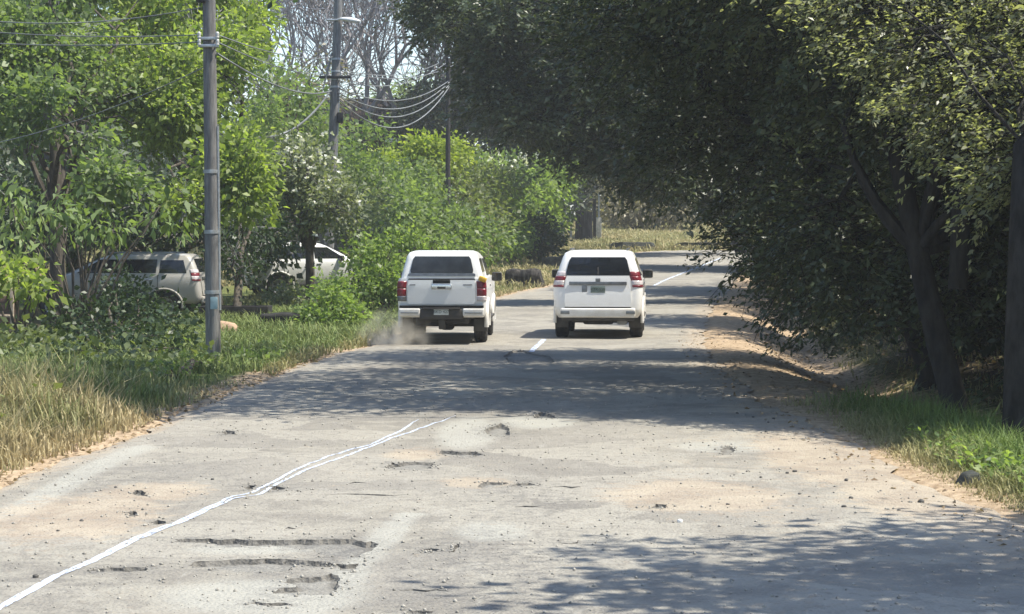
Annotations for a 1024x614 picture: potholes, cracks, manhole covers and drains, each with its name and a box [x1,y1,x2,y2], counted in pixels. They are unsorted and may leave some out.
pothole [387,462,434,470]
pothole [504,350,555,364]
pothole [189,558,333,572]
pothole [273,573,340,595]
pothole [175,538,378,557]
pothole [484,423,511,437]
